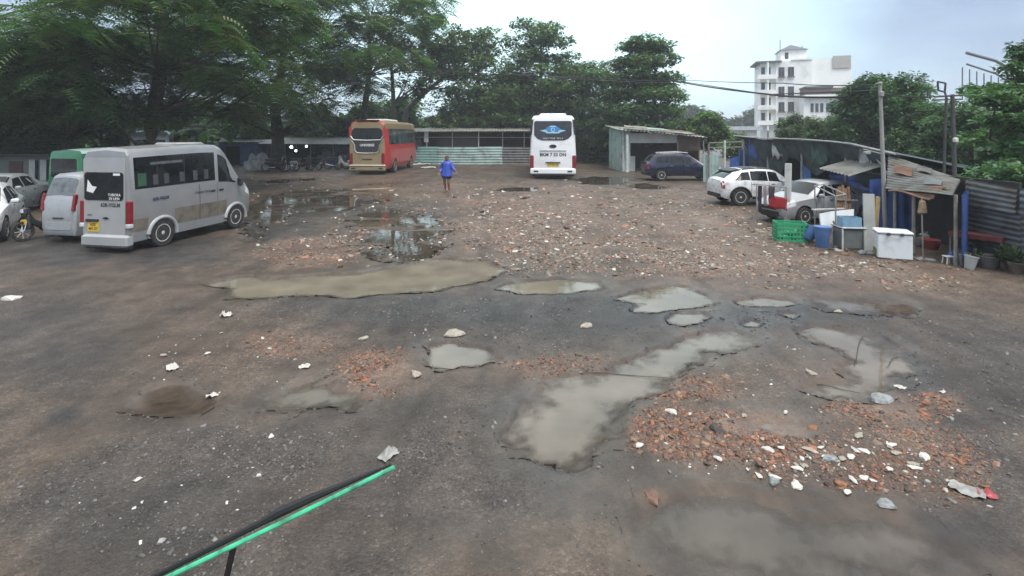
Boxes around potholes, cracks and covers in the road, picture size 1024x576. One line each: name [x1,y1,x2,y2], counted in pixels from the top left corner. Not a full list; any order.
pothole [665,311,712,327]
pothole [339,208,463,264]
pothole [236,189,390,242]
pothole [571,176,636,185]
pothole [799,294,927,318]
pothole [115,378,225,418]
pothole [200,258,510,300]
pothole [734,295,802,308]
pothole [248,369,379,420]
pothole [760,308,927,404]
pothole [495,277,607,295]
pothole [421,340,508,373]
